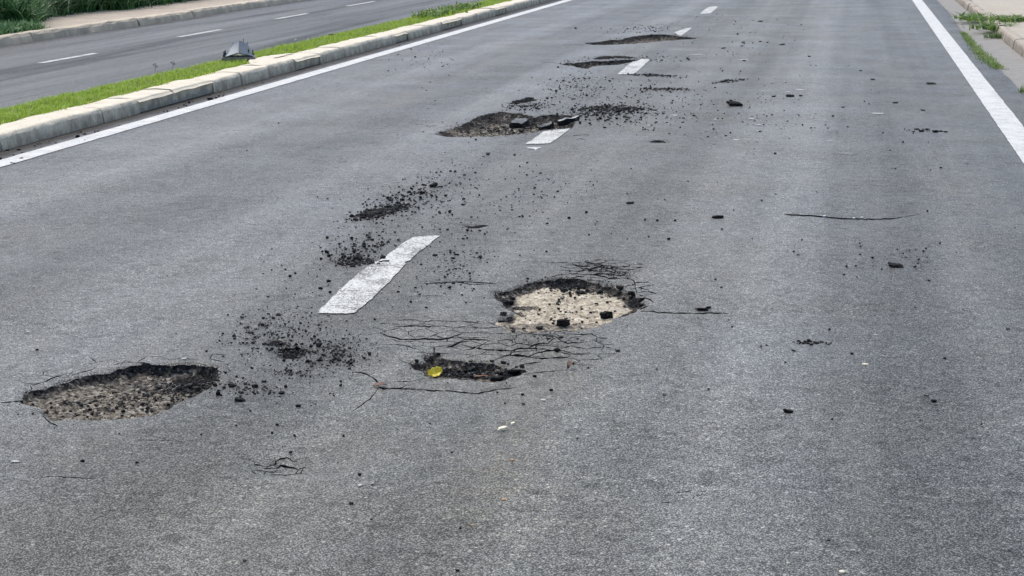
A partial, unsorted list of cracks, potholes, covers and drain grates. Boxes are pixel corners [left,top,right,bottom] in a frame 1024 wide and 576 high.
pothole [586,34,696,45]
